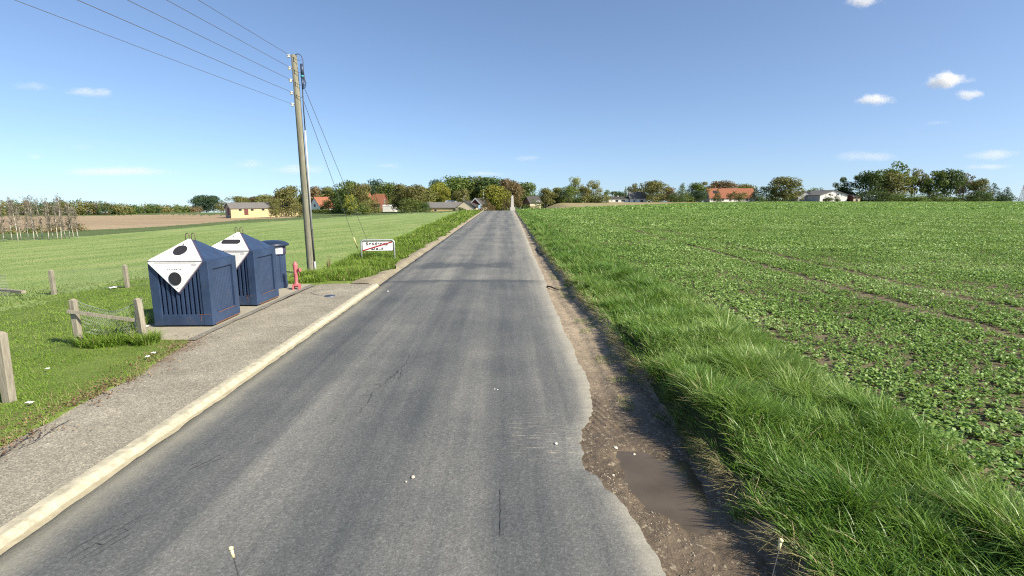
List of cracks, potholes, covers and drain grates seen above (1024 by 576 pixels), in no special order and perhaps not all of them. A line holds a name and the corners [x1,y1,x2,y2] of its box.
crack [69,513,146,559]
